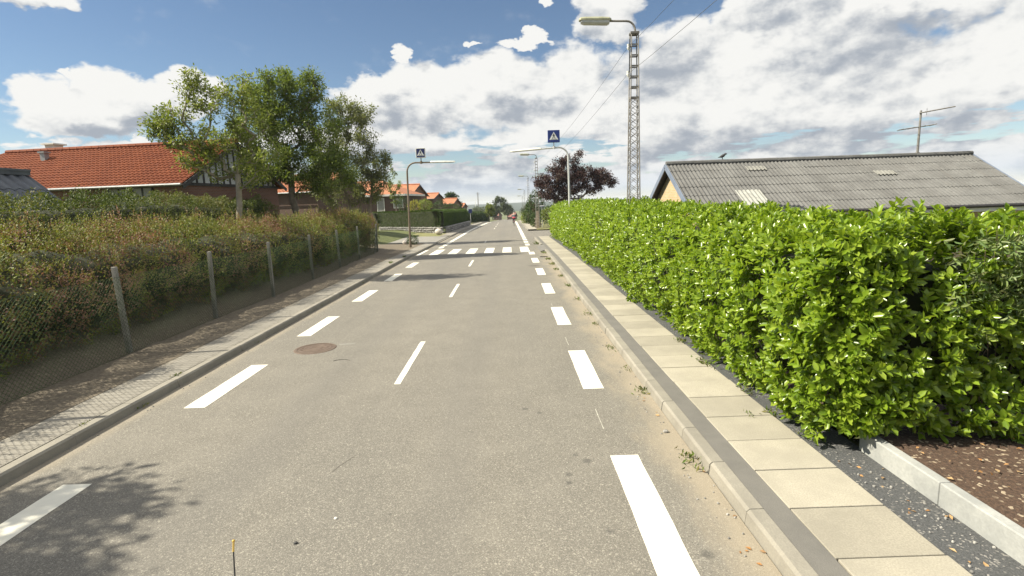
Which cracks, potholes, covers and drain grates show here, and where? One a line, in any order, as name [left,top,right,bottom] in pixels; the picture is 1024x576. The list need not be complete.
manhole cover [293,343,355,354]
